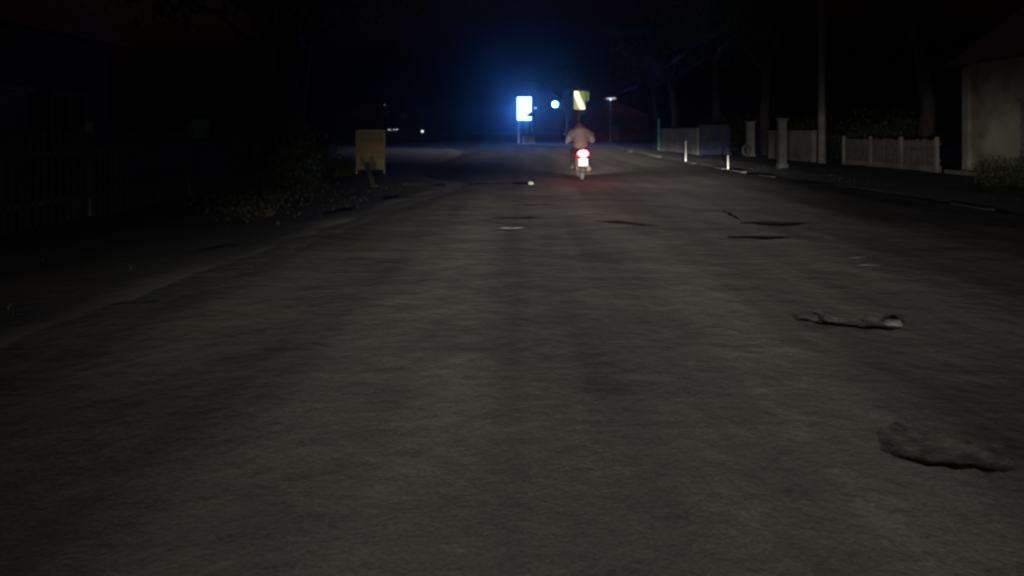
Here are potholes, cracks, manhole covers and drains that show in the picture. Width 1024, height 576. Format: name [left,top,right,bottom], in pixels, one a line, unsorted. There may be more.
pothole [789,309,900,331]
pothole [877,421,1024,474]
